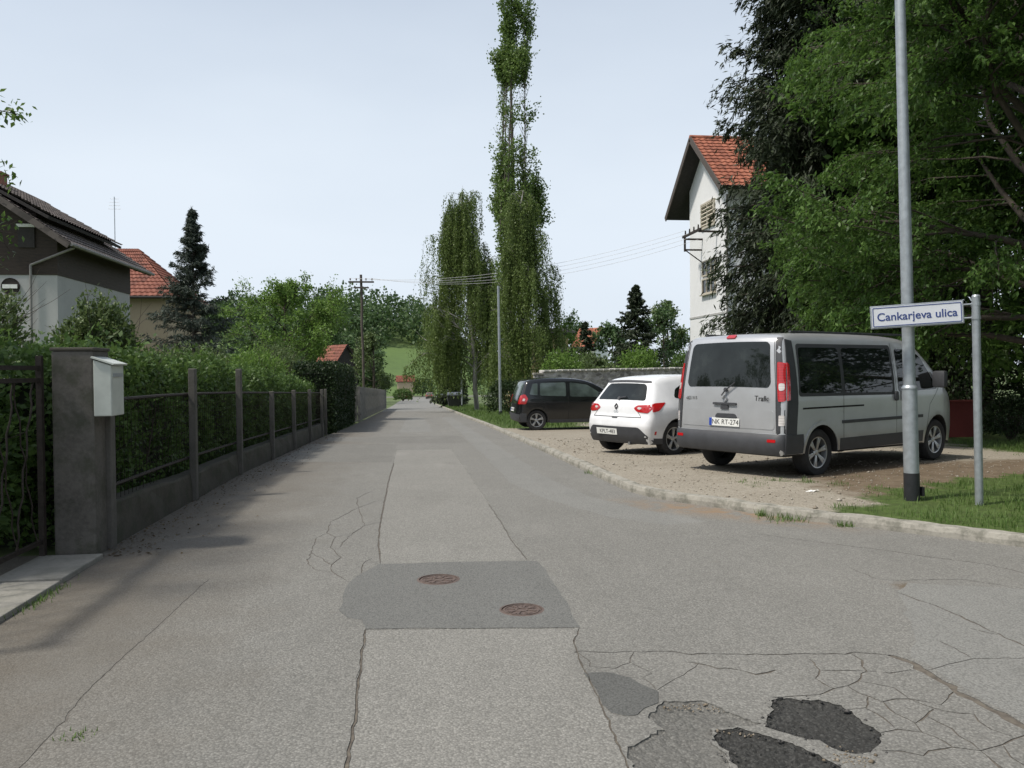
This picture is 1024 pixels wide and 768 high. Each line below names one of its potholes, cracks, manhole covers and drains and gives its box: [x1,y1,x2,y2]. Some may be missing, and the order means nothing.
crack [307,492,381,581]
manhole cover [417,574,460,585]
manhole cover [499,603,544,616]
crack [578,534,1024,768]
pothole [627,700,762,768]
